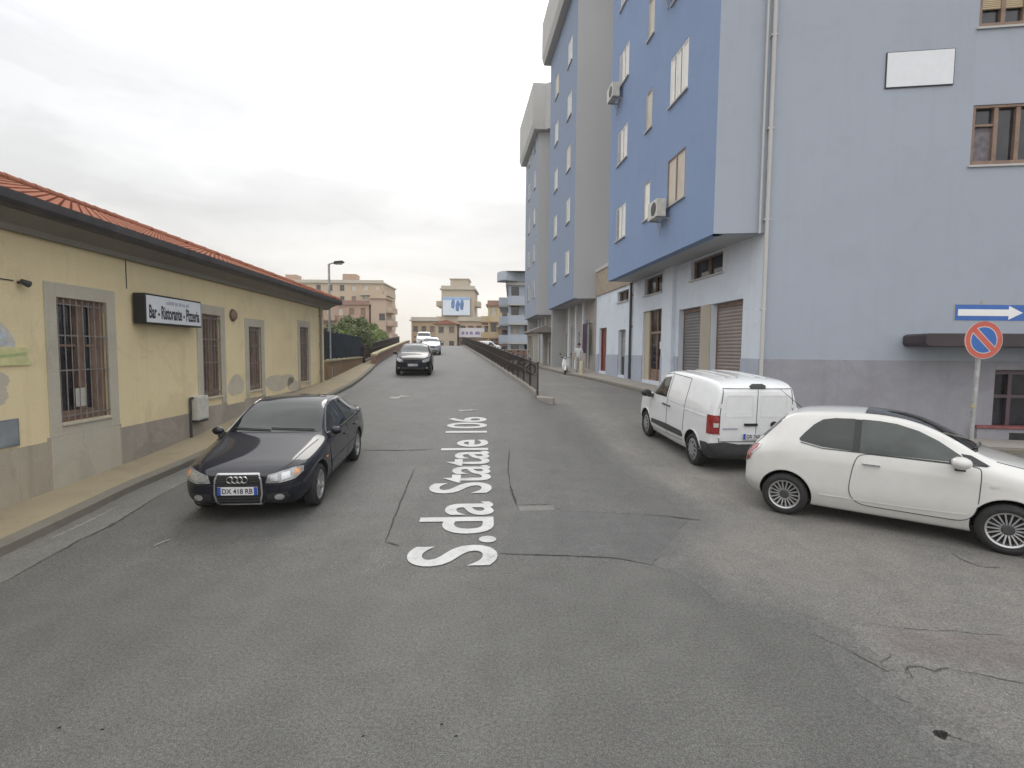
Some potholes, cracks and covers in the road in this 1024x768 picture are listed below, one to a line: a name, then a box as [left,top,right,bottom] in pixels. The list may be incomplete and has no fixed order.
pothole [932,730,960,740]
crack [816,624,1022,683]
